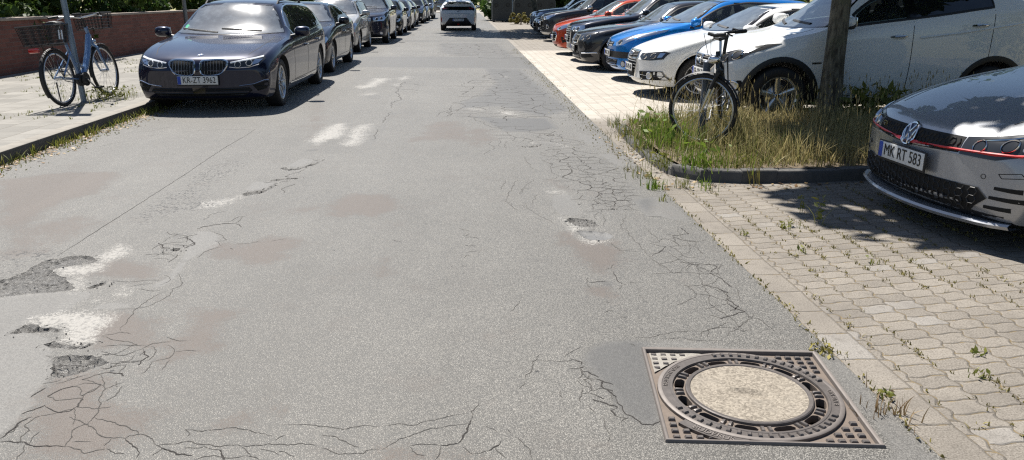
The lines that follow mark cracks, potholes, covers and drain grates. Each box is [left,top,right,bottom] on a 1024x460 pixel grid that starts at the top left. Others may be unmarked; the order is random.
pothole [0,254,102,299]
pothole [81,279,114,292]
pothole [562,217,604,229]
pothole [572,229,618,243]
pothole [45,353,114,380]
crack [439,71,773,341]
crack [120,211,280,330]
crack [519,344,660,438]
manhole cover [641,347,886,448]
crack [0,332,532,460]
pothole [5,323,67,338]
pothole [37,337,103,353]
